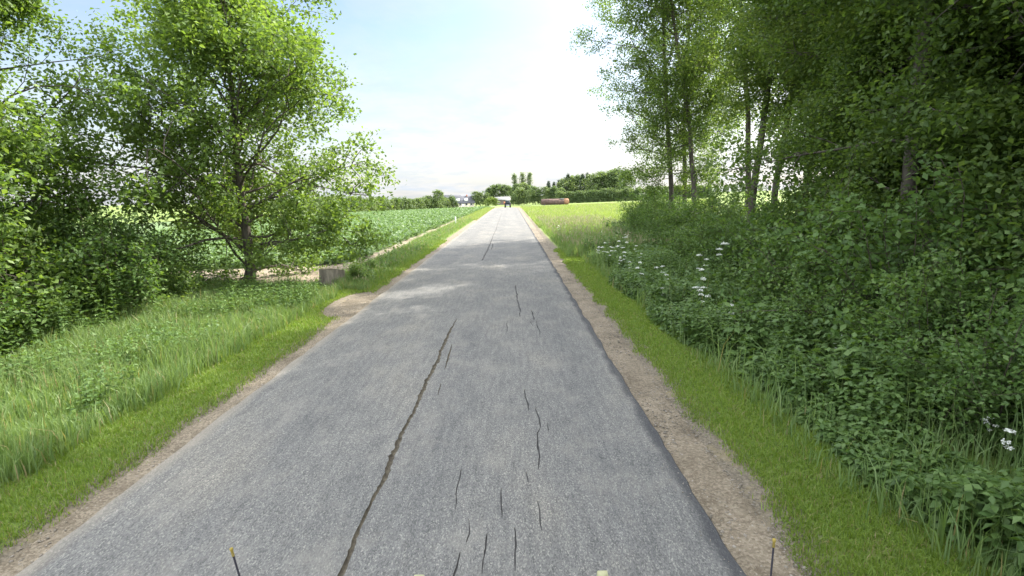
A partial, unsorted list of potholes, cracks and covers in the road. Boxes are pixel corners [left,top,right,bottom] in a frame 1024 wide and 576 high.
crack [506,285,540,332]
crack [337,319,487,576]
